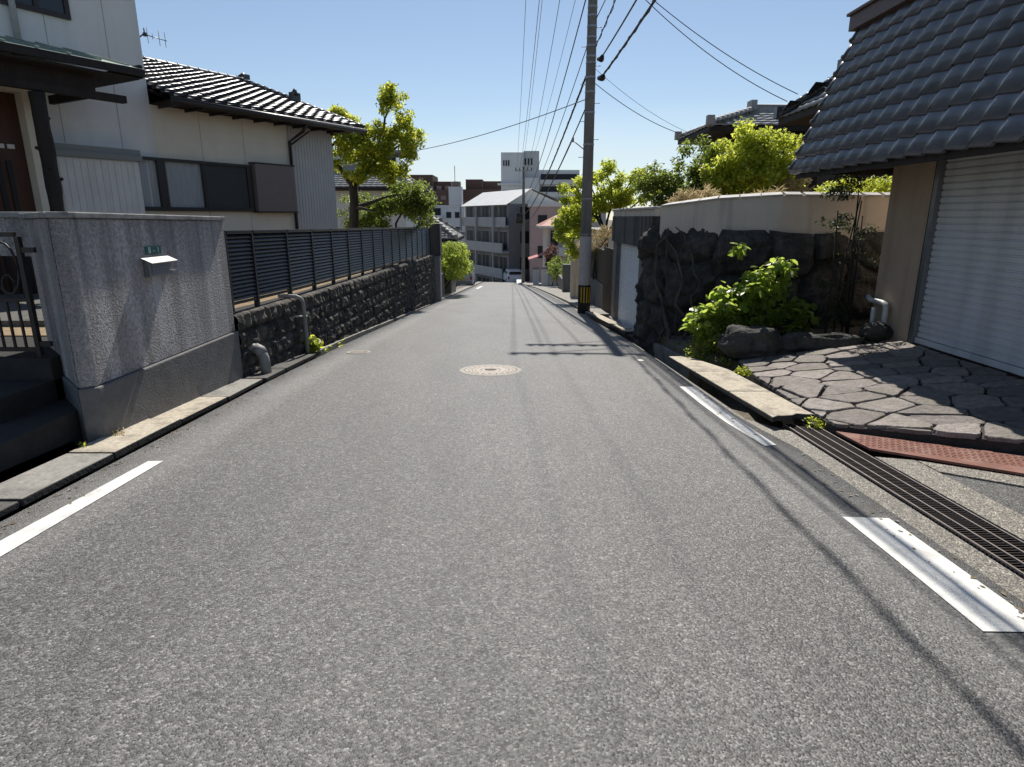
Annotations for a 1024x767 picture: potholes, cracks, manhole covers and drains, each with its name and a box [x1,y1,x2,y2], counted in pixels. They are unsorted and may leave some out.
drain grate [782,423,1024,579]
manhole cover [459,364,522,376]
